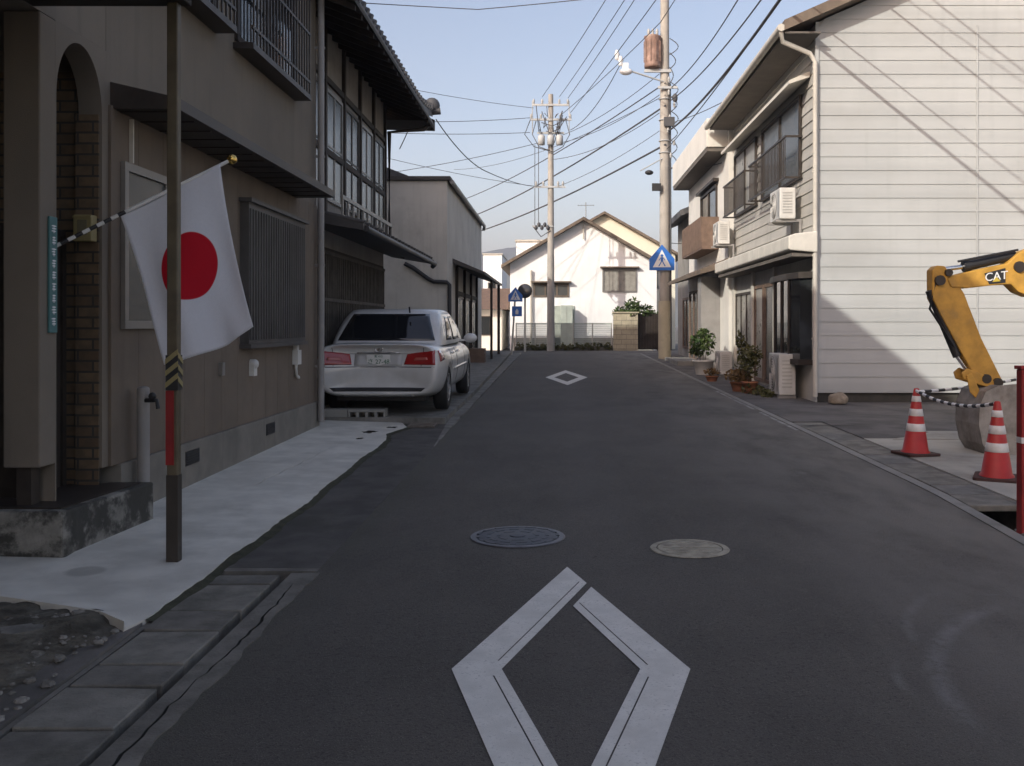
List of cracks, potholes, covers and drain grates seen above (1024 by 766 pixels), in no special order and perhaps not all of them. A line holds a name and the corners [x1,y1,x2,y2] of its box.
manhole cover [650,539,730,558]
manhole cover [470,526,565,548]
